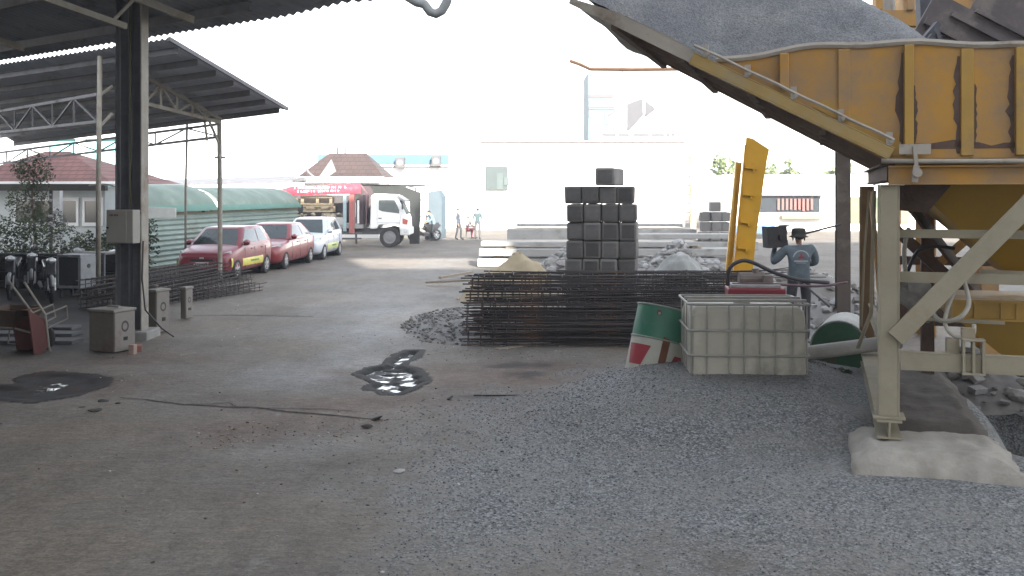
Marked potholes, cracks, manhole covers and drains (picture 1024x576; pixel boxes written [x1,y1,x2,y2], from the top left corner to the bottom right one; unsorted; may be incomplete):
crack [120,397,382,420]
pothole [351,349,433,395]
